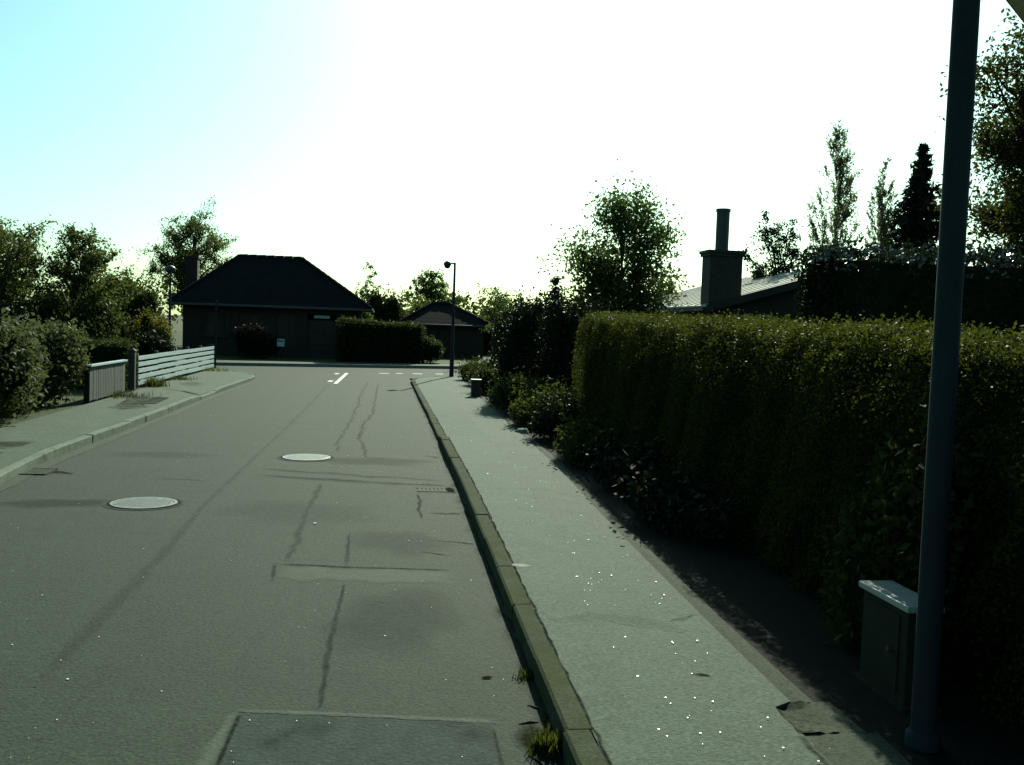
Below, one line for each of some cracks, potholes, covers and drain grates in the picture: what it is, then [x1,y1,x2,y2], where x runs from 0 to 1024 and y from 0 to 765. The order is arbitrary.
crack [256,382,460,561]
manhole cover [102,496,185,510]
crack [315,583,347,712]
manhole cover [277,454,336,462]
